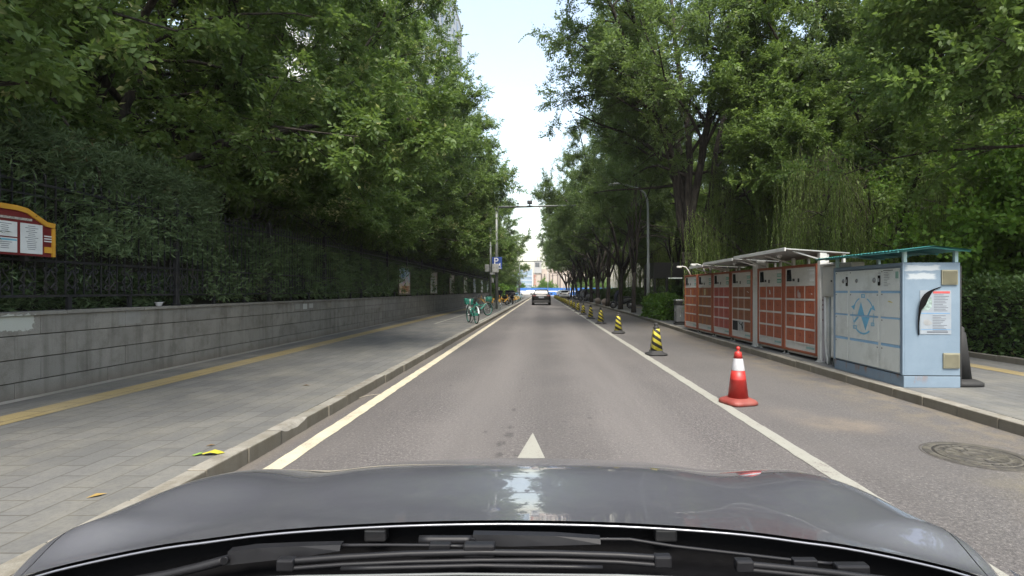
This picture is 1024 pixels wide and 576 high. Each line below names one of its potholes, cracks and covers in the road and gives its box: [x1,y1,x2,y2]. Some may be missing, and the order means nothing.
manhole cover [918,442,1024,472]
